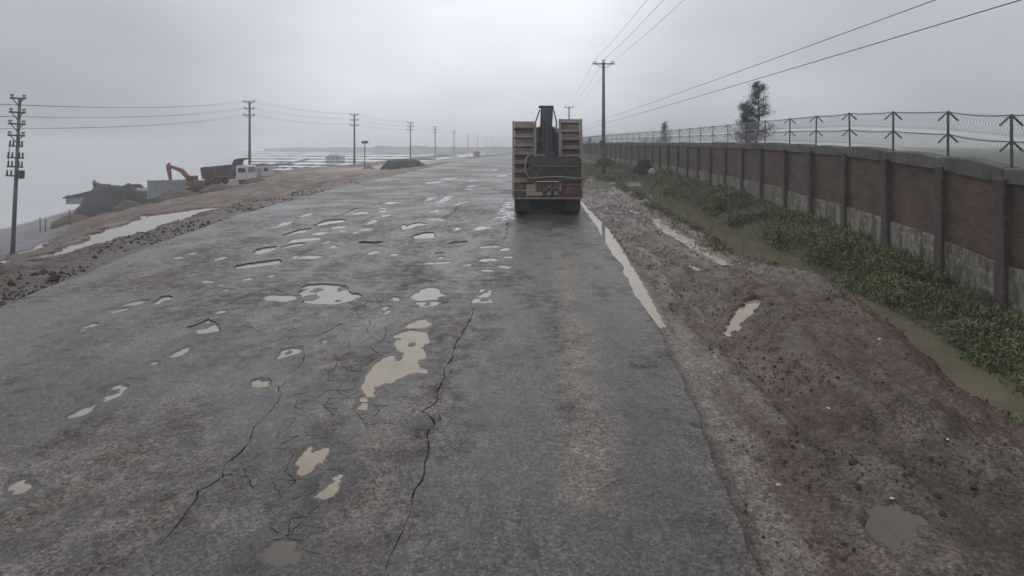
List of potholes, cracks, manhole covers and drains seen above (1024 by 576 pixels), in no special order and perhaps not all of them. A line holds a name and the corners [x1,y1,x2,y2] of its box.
pothole [234,259,282,269]
crack [160,294,400,554]
pothole [2,474,42,499]
pothole [309,469,346,502]
pothole [249,377,273,388]
pothole [298,283,363,304]
pothole [65,382,131,419]
pothole [292,442,333,477]
pothole [408,286,450,301]
pothole [349,317,438,413]
pothole [255,538,308,576]
